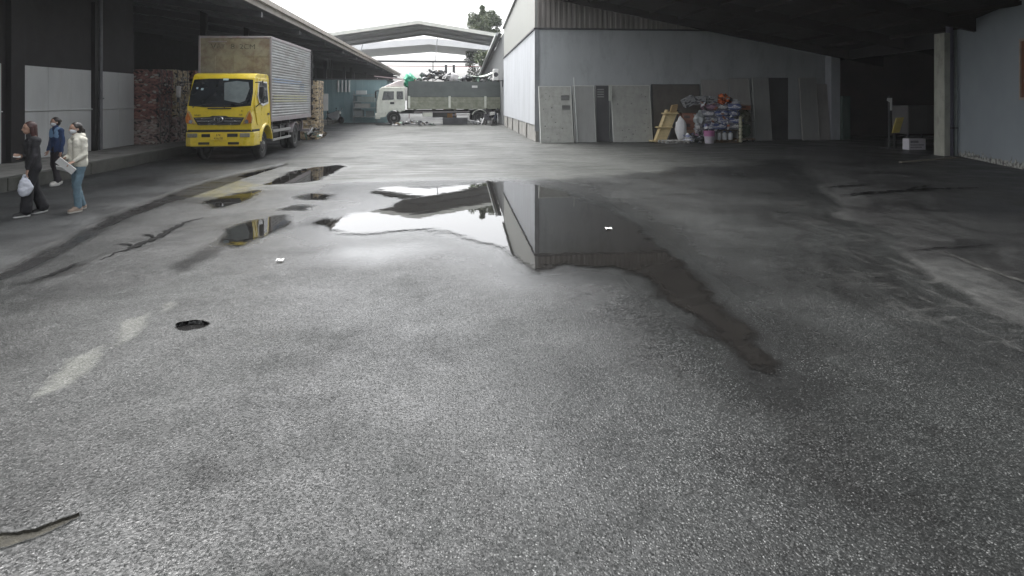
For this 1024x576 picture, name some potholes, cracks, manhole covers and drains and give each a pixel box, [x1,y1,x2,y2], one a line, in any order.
crack [824,183,978,195]
pothole [174,320,210,331]
crack [100,217,203,260]
